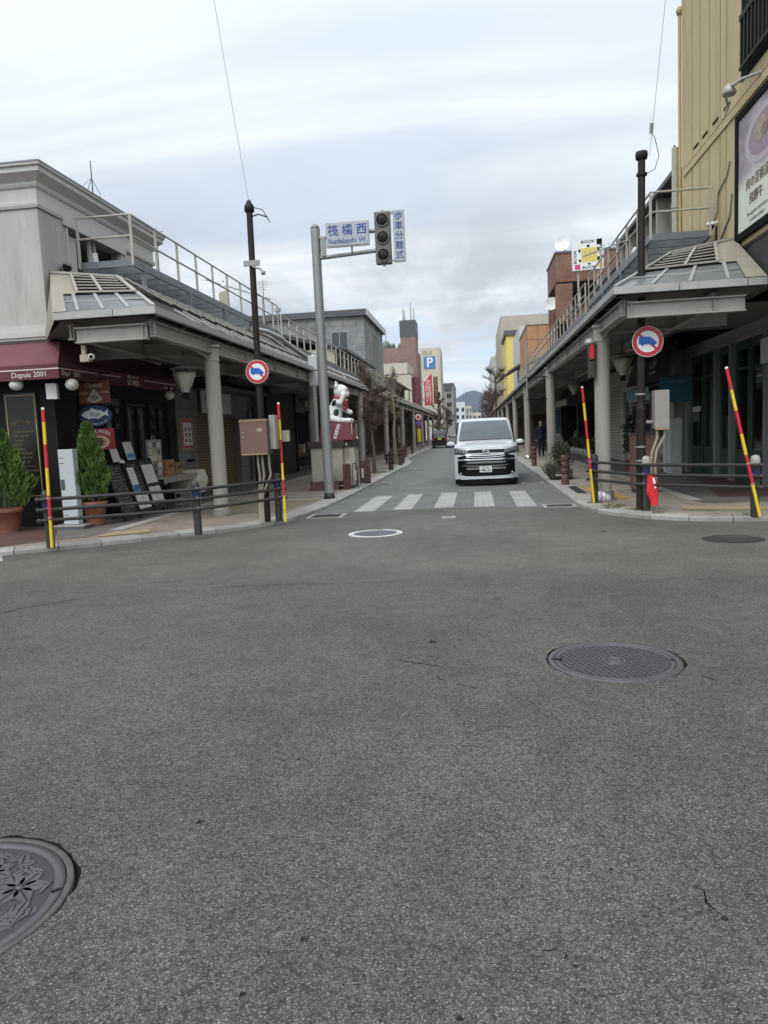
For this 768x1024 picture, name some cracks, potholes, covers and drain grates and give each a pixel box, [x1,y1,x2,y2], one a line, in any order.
manhole cover [0,835,82,955]
manhole cover [546,641,688,683]
manhole cover [701,535,766,544]
manhole cover [348,529,403,537]
